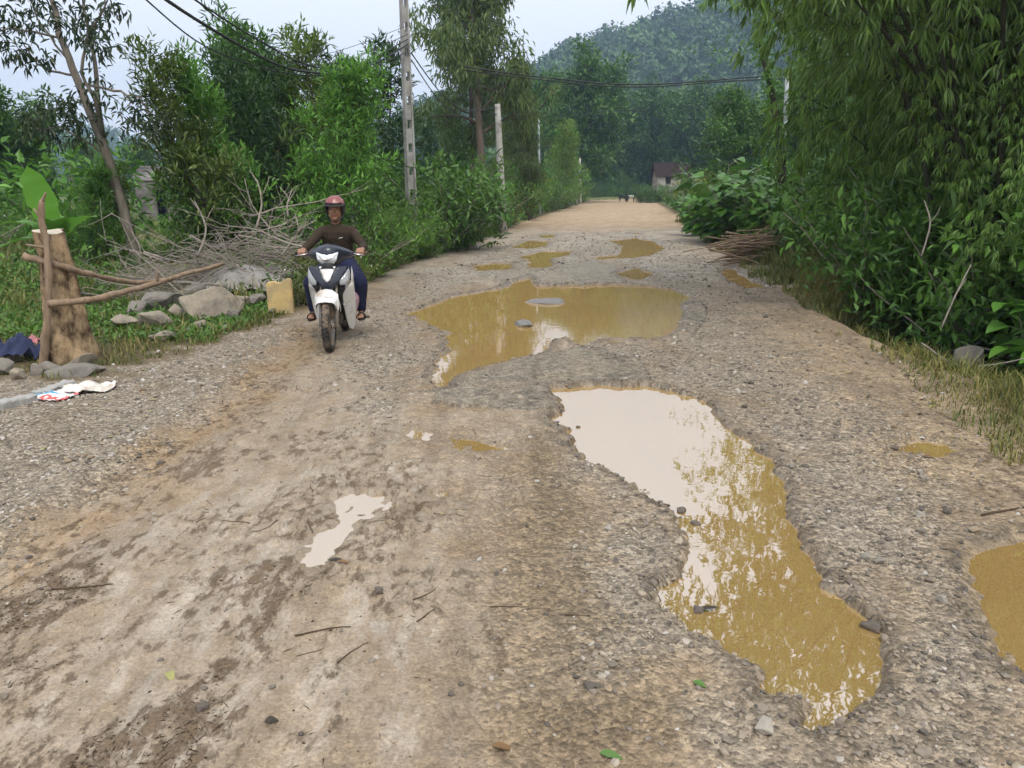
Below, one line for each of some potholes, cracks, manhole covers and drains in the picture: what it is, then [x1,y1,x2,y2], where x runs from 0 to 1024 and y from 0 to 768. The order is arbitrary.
pothole [508,240,551,249]
pothole [611,266,657,280]
pothole [578,236,668,260]
pothole [719,266,772,288]
pothole [467,261,518,271]
pothole [547,381,895,736]
pothole [399,274,696,389]
pothole [951,529,1024,673]
pothole [513,250,577,268]
